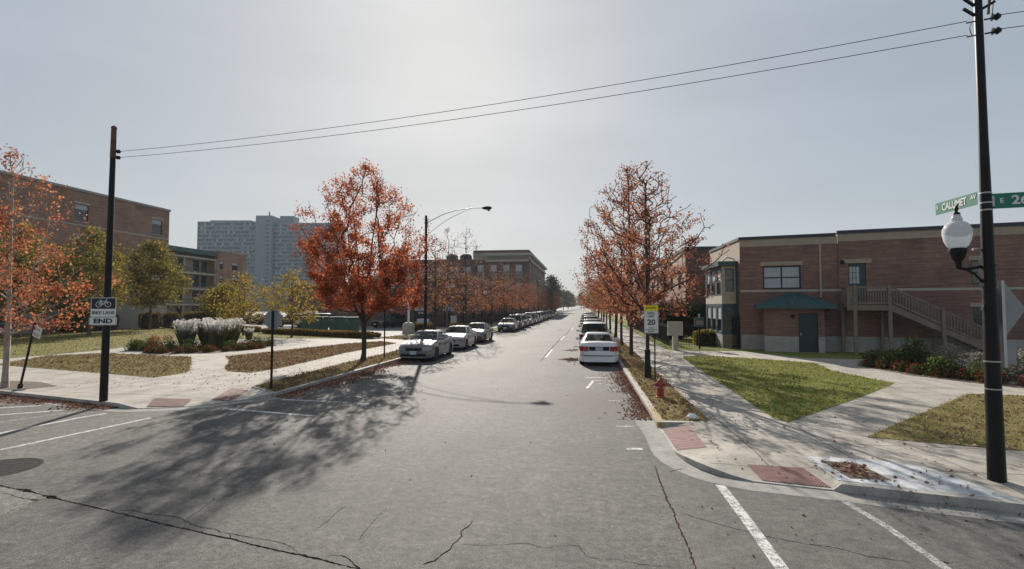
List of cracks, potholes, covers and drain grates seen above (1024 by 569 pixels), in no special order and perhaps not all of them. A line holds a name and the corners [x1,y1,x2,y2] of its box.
crack [0,485,360,569]
manhole cover [0,458,44,476]
crack [422,522,670,567]
